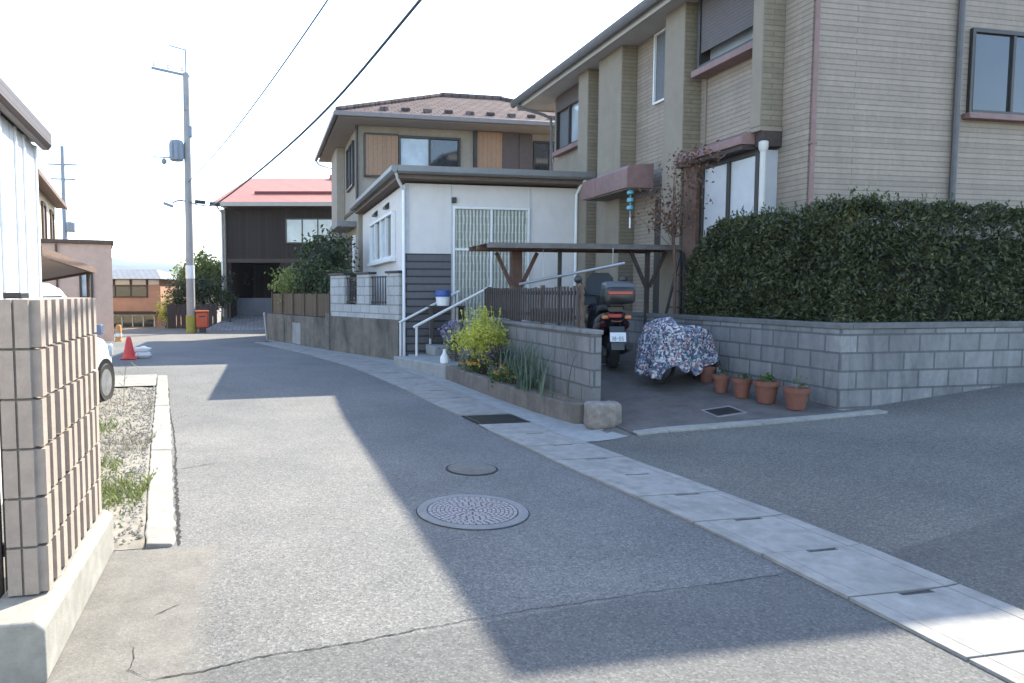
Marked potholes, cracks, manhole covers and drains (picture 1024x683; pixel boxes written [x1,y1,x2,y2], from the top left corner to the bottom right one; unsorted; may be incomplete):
manhole cover [416,494,530,530]
crack [128,574,779,680]
manhole cover [446,462,498,475]
drain grate [463,414,530,424]
